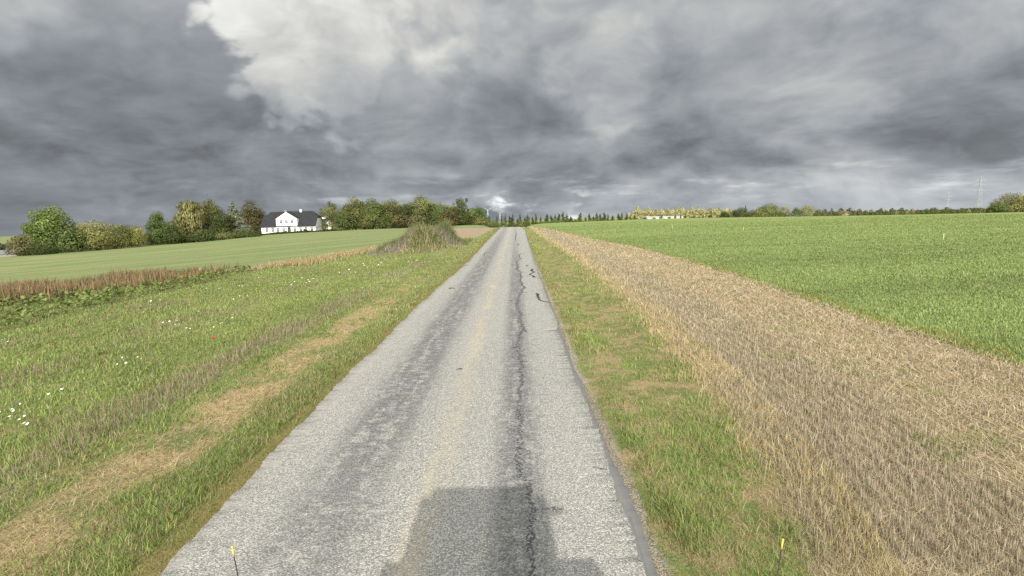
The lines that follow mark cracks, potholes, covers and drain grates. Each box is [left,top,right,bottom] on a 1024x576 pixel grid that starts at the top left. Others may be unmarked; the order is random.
crack [511,236,561,576]
